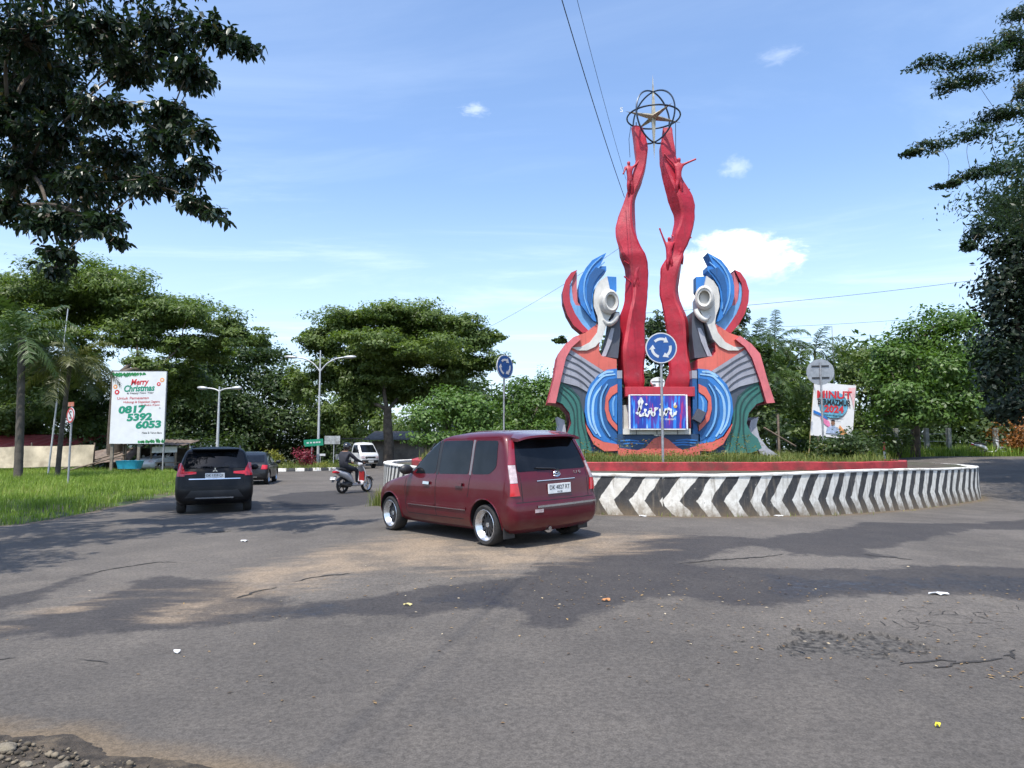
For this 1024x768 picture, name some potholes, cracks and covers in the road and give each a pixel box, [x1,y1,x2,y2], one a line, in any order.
crack [880,603,1019,641]
crack [689,554,782,563]
crack [899,649,1016,668]
